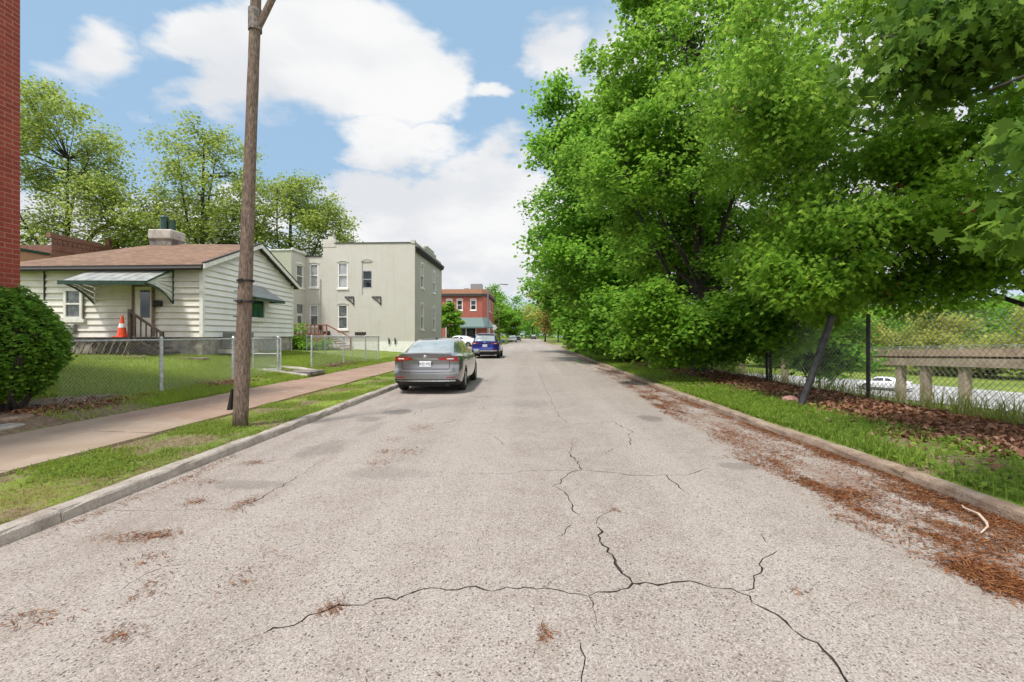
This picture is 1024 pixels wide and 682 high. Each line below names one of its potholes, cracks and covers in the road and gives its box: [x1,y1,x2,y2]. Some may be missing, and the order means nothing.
crack [241,511,849,682]
crack [480,444,708,536]
